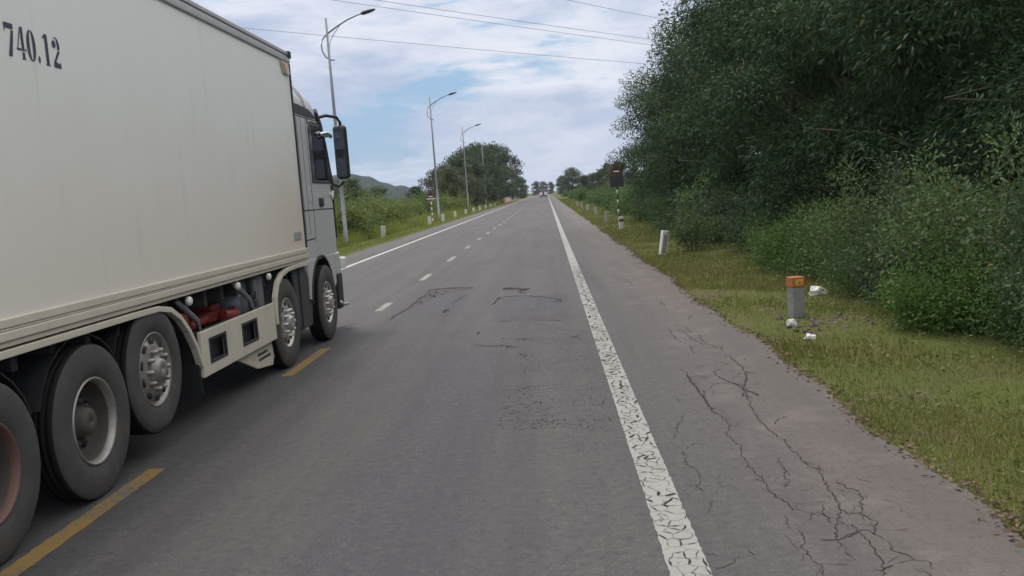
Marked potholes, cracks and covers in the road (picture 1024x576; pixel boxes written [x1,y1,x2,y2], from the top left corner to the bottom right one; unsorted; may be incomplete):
crack [481,267,932,576]
